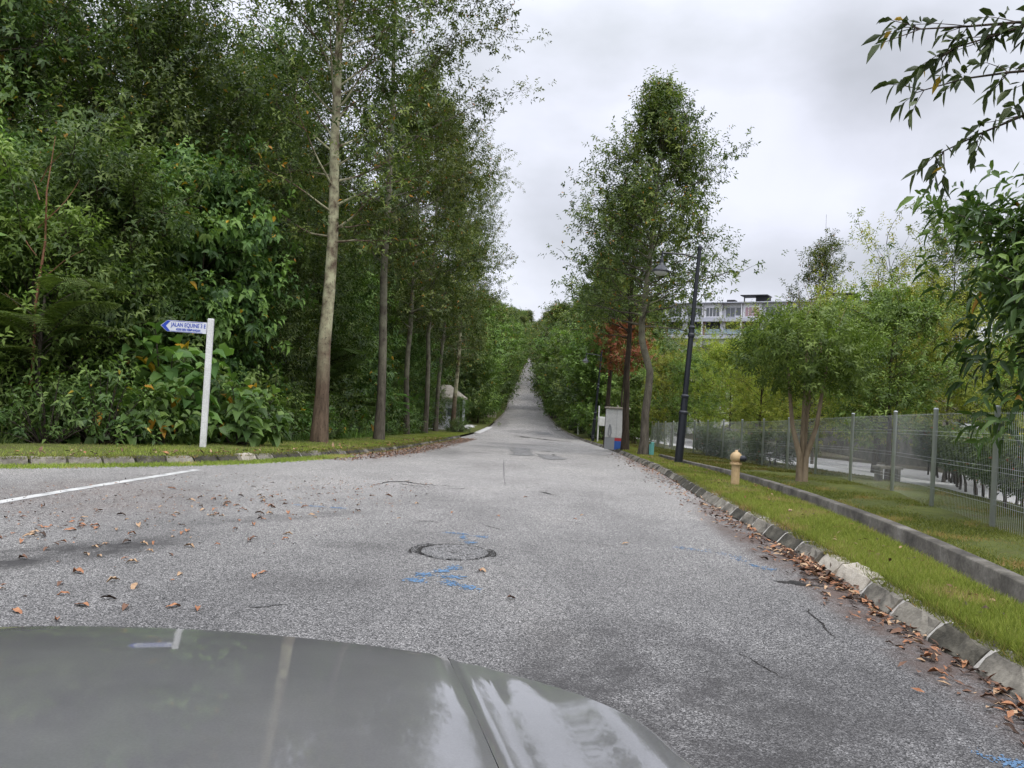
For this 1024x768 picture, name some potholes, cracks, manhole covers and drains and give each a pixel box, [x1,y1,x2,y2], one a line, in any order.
manhole cover [408,543,497,560]
